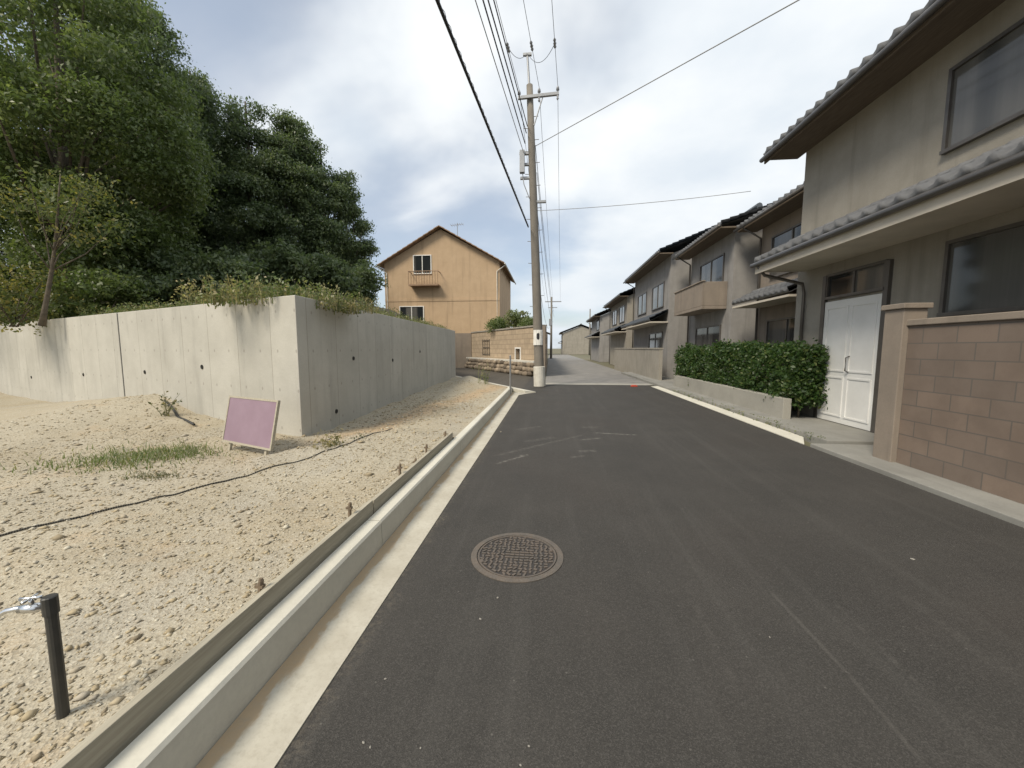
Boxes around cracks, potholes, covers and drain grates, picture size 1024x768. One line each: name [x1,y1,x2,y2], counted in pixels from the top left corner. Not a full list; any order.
manhole cover [471,533,563,583]
